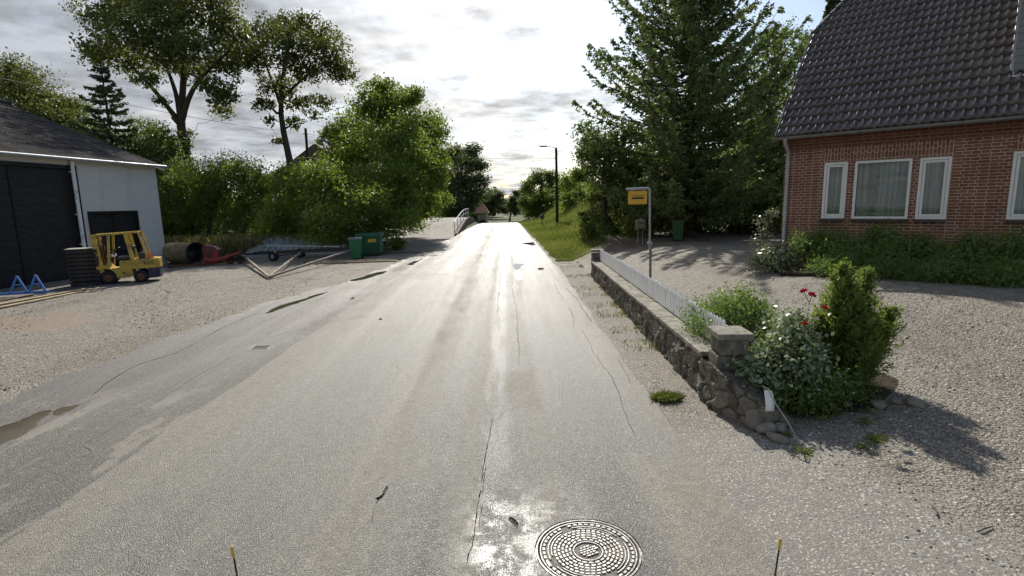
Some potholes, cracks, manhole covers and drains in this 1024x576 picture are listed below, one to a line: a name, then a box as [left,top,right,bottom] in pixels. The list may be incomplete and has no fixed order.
crack [92,299,308,395]
crack [559,290,635,435]
manhole cover [535,519,643,576]
crack [467,418,493,562]
